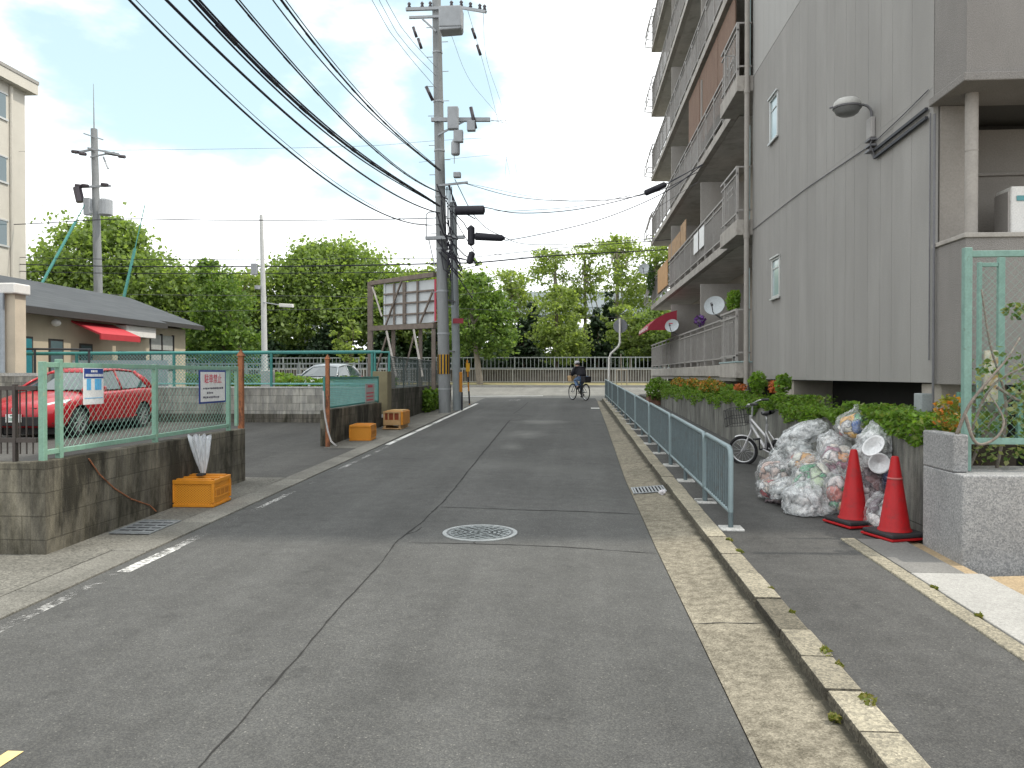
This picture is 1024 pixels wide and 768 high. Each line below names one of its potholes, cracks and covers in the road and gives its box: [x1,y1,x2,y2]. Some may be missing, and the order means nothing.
manhole cover [442,524,517,541]
drain grate [109,519,182,534]
drain grate [631,485,667,494]
